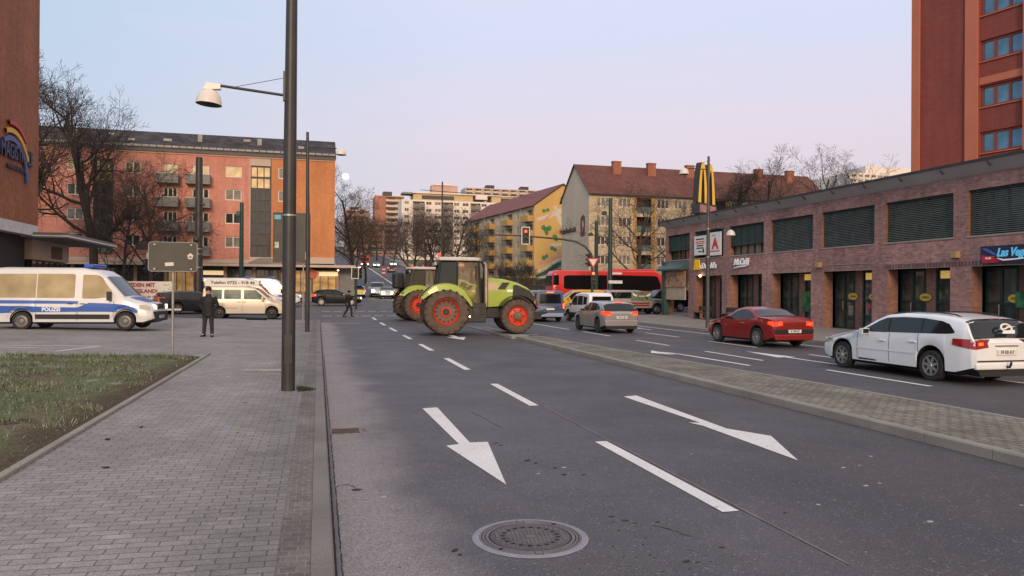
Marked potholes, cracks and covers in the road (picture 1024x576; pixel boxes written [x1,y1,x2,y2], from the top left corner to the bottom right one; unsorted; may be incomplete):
drain grate [330,427,368,435]
manhole cover [472,519,589,558]
